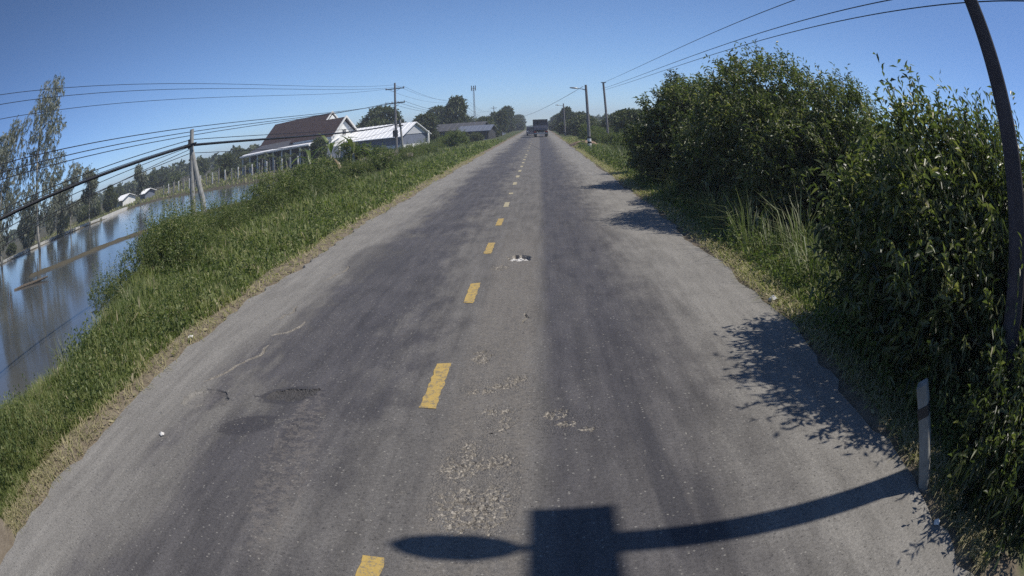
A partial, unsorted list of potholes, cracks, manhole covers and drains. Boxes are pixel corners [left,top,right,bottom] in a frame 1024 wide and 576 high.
crack [204,306,305,382]
pothole [266,388,320,402]
